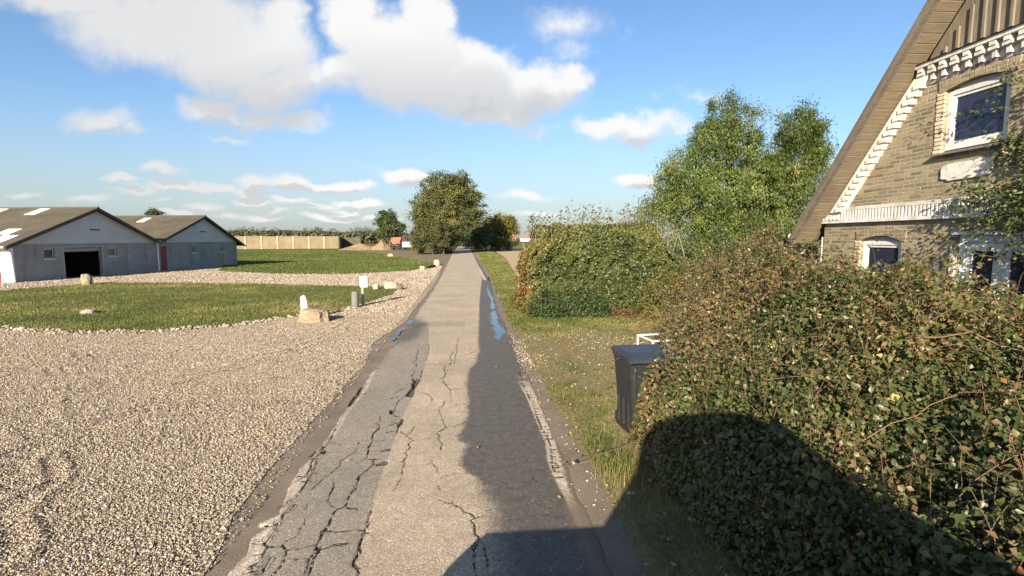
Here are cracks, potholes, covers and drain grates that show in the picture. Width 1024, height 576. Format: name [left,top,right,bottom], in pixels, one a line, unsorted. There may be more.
crack [242,339,488,576]
